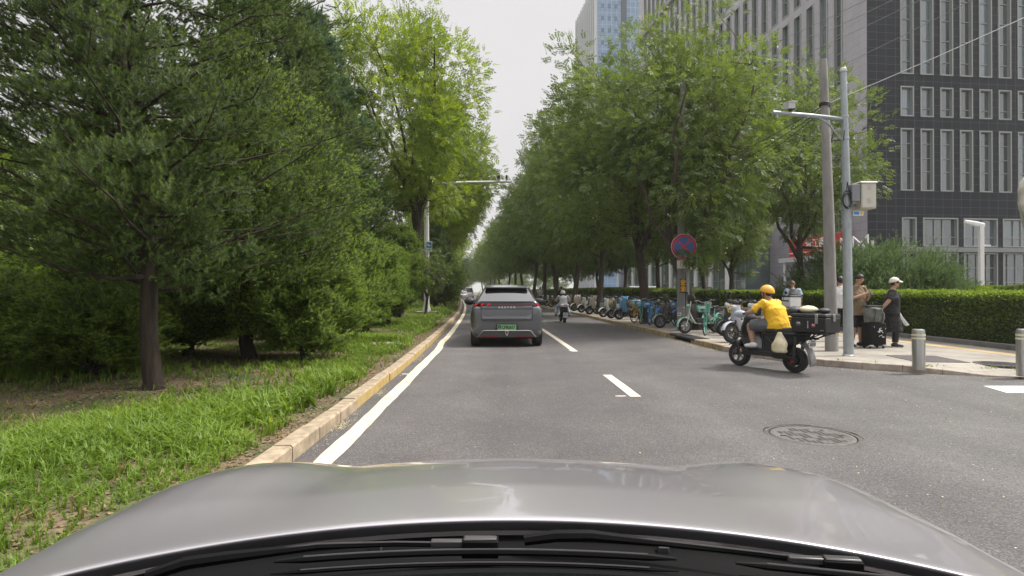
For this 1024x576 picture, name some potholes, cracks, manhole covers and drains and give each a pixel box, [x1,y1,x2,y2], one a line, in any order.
manhole cover [763,425,864,447]
